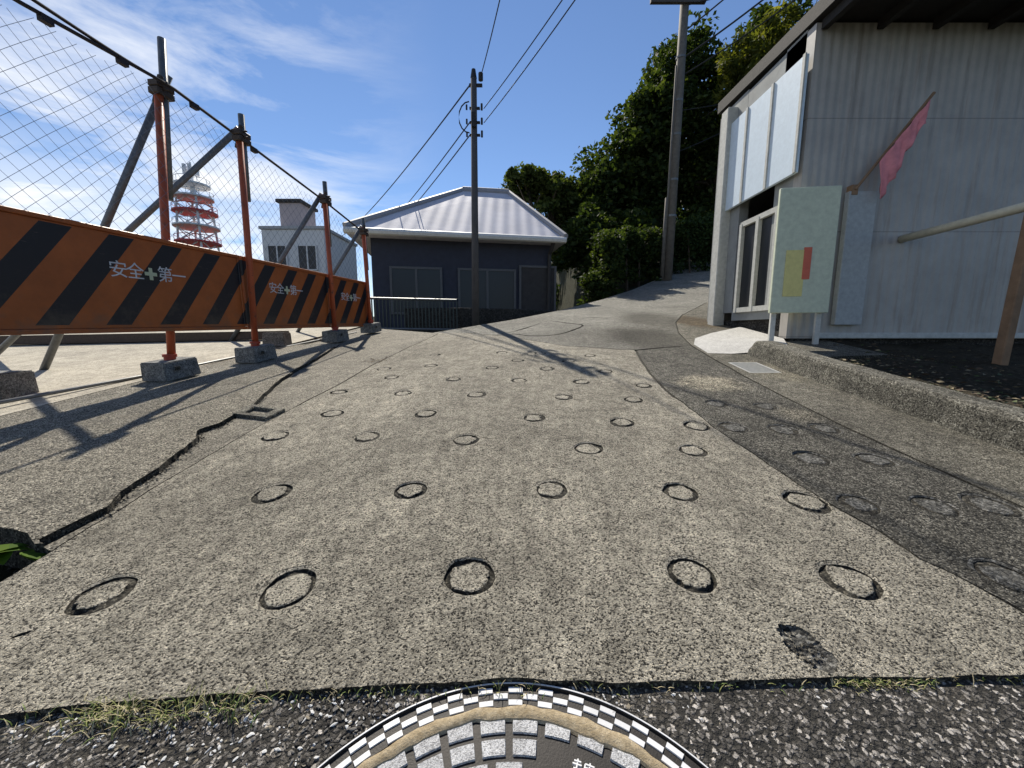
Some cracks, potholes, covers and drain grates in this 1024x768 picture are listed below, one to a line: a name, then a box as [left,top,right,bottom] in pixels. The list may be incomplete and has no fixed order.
manhole cover [317,682,708,768]
crack [39,347,335,546]
